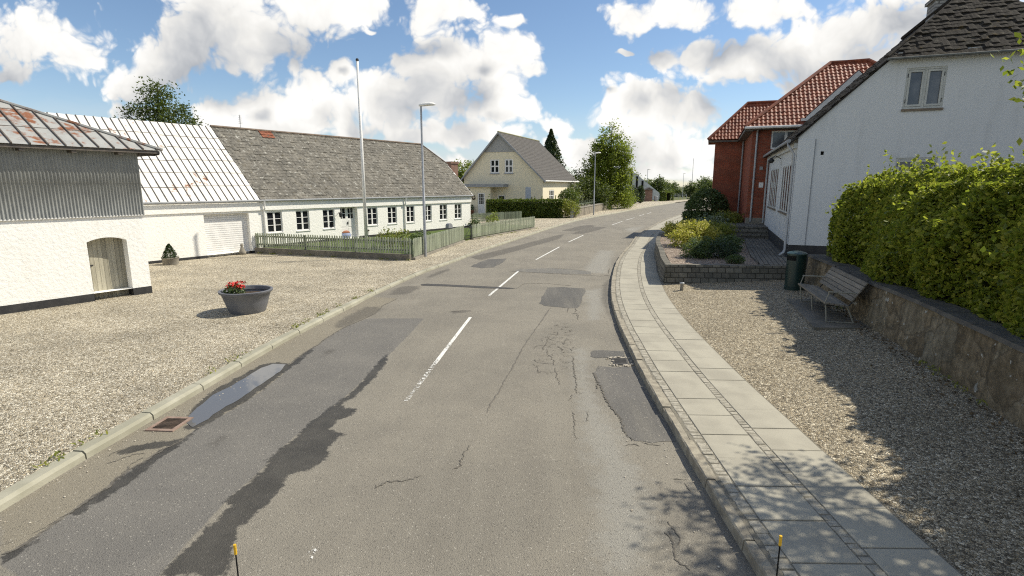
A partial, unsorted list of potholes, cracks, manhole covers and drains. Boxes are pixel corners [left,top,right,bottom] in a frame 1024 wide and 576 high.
crack [664,521,691,571]
drain grate [144,416,194,432]
crack [487,308,661,446]
